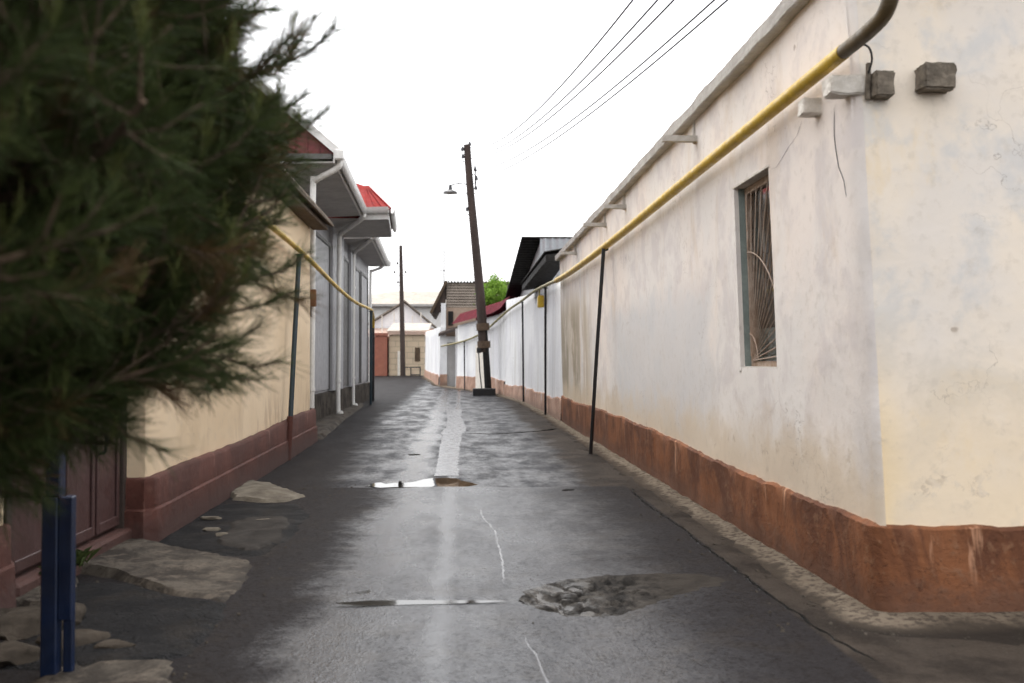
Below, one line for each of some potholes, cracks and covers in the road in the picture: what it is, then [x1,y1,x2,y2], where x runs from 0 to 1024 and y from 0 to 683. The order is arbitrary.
crack [525,636,549,683]
crack [480,508,505,583]
pothole [518,573,726,617]
